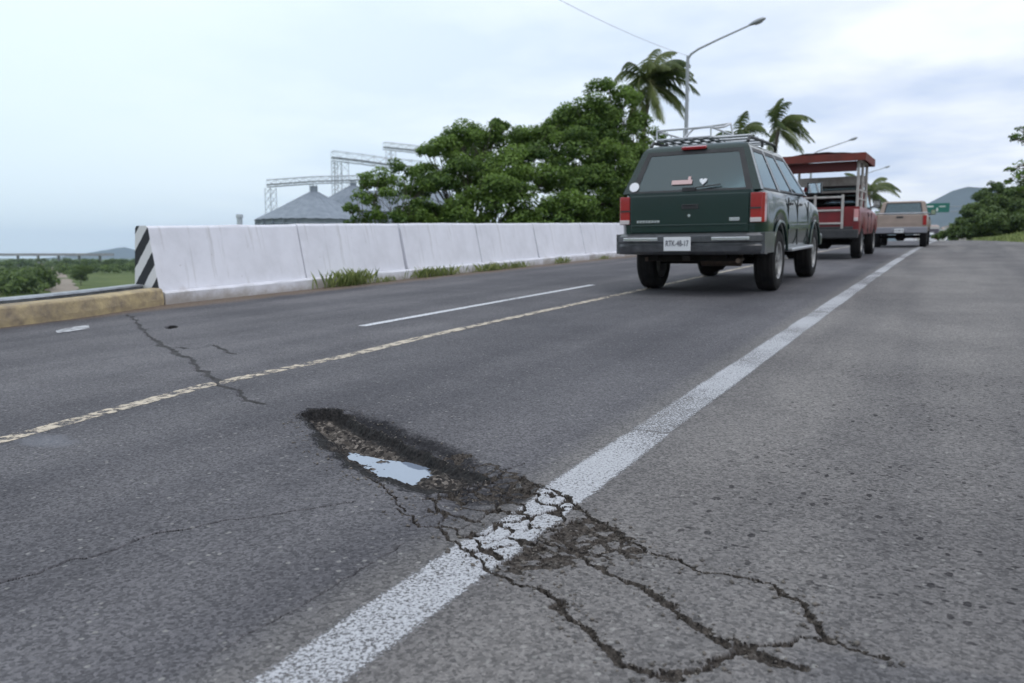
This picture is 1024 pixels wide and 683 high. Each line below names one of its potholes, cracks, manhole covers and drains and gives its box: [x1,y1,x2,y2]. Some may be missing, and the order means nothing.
crack [365,454,892,683]
crack [127,315,267,405]
crack [0,501,353,584]
pothole [298,408,492,496]
